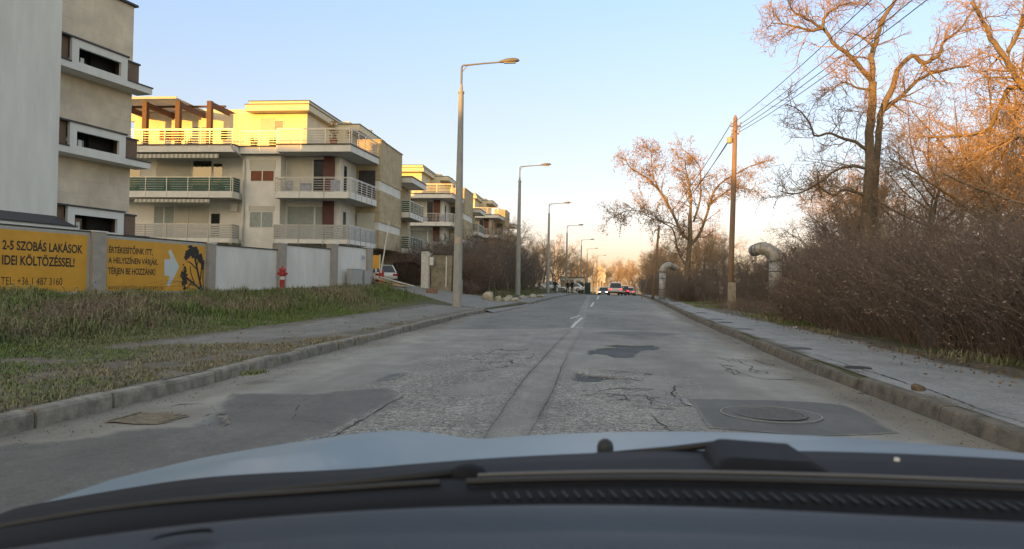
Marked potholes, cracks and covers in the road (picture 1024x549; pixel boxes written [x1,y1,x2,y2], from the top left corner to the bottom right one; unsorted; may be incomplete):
crack [467,339,534,372]
manhole cover [720,406,823,423]
crack [586,370,679,431]
pothole [572,372,628,382]
